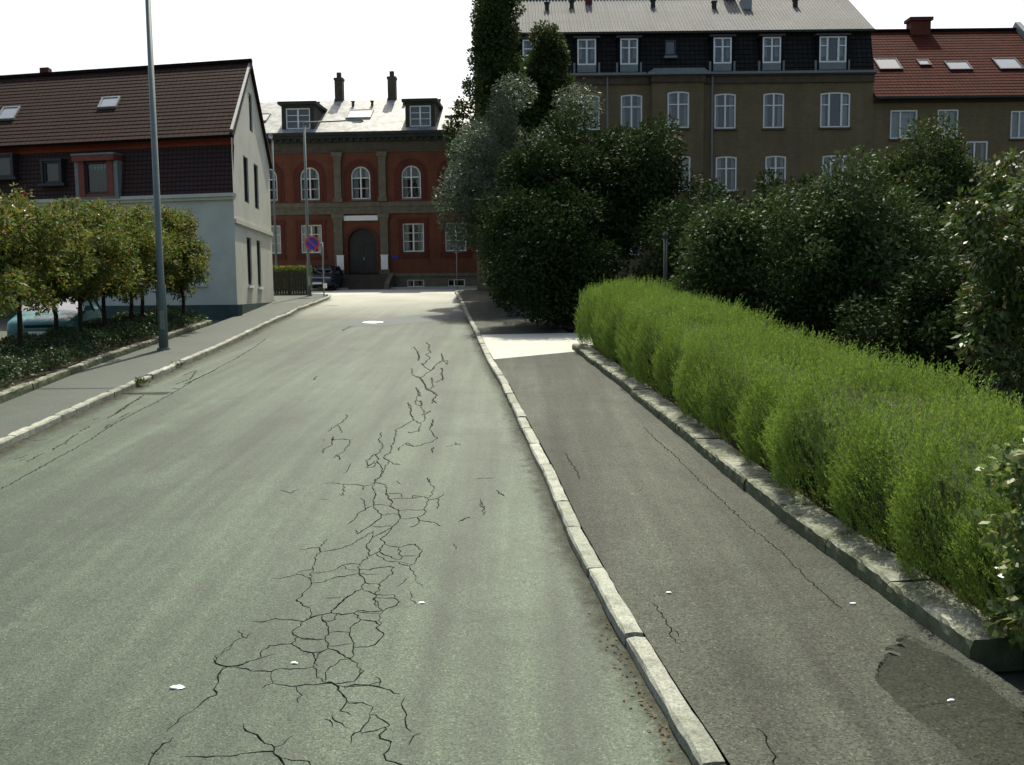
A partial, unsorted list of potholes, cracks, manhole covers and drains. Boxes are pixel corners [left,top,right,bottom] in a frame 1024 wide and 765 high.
crack [13,370,212,462]
crack [654,603,681,645]
crack [756,727,777,765]
crack [148,342,504,765]
crack [645,428,842,609]
